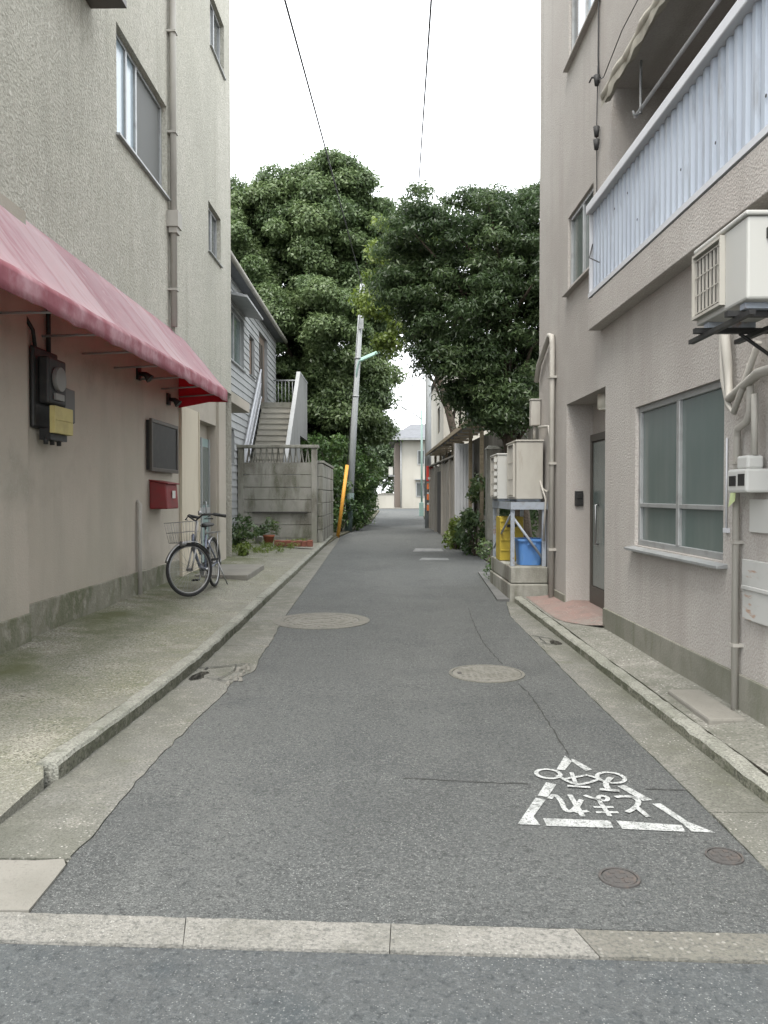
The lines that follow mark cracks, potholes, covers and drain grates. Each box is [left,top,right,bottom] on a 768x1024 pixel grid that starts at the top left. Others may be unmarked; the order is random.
manhole cover [449,664,525,683]
crack [519,684,569,754]
manhole cover [705,847,744,866]
manhole cover [598,867,641,889]
manhole cover [273,613,370,630]
